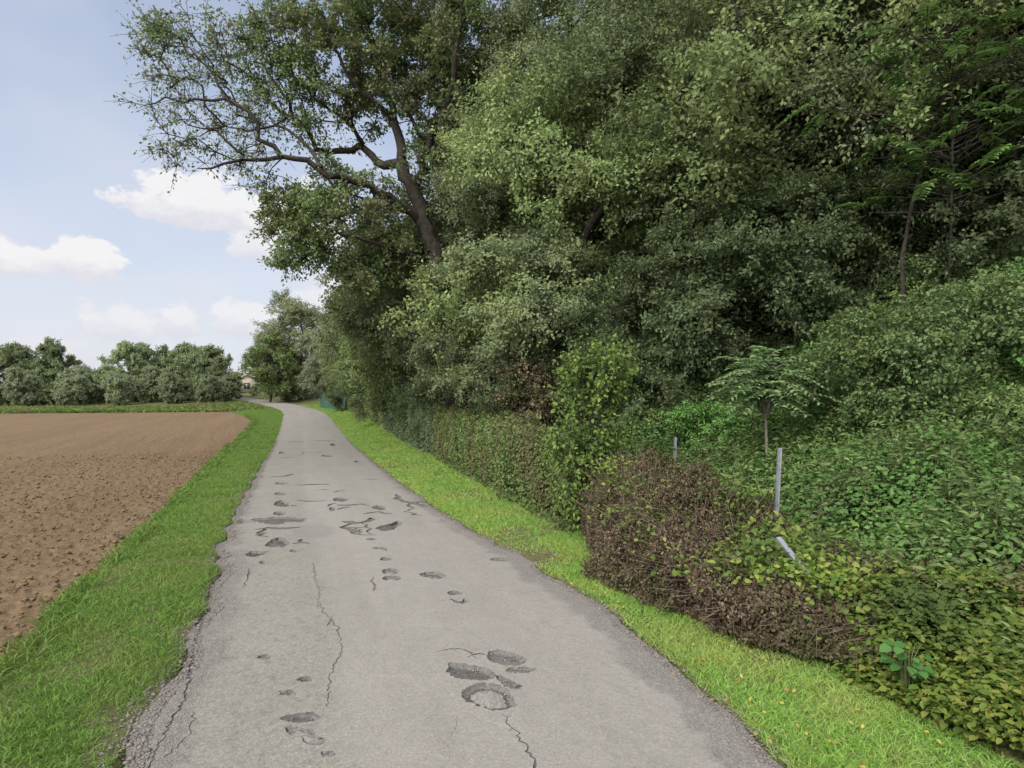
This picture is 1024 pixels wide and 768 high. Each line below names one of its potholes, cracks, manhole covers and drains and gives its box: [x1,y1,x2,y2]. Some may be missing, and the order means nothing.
pothole [375,521,403,531]
pothole [280,711,321,723]
crack [506,717,537,768]
pothole [461,682,517,711]
crack [313,563,343,706]
pothole [265,537,290,547]
pothole [284,725,327,745]
pothole [487,649,526,666]
pothole [446,662,498,681]
pothole [506,666,538,674]
pothole [494,674,523,689]
